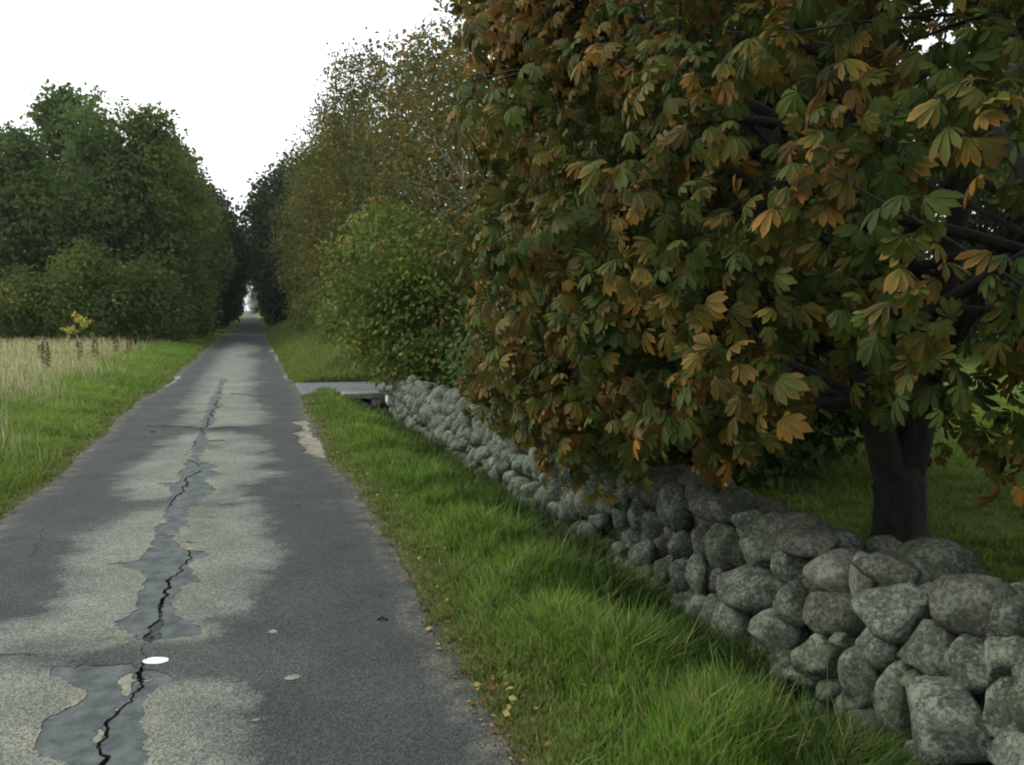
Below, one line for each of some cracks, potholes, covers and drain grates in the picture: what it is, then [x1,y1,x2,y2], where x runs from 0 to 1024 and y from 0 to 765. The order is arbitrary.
crack [147,391,247,504]
crack [97,651,147,765]
crack [157,541,194,614]
